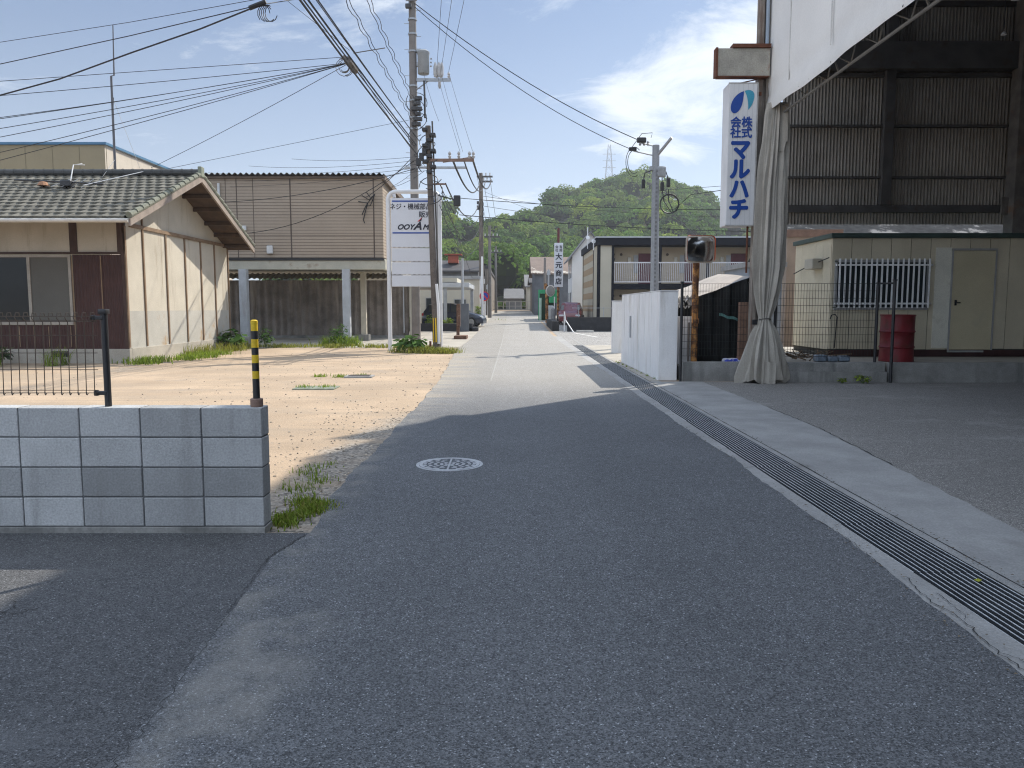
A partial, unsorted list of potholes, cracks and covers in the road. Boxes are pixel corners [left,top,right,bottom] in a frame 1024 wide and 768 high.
drain grate [661,403,697,412]
drain grate [650,396,683,404]
drain grate [706,433,762,449]
manhole cover [416,458,483,471]
drain grate [688,421,735,434]
crack [905,576,1022,669]
drain grate [757,466,837,492]
drain grate [729,448,795,468]
drain grate [845,524,981,575]
drain grate [794,491,895,526]
drain grate [673,411,714,422]
